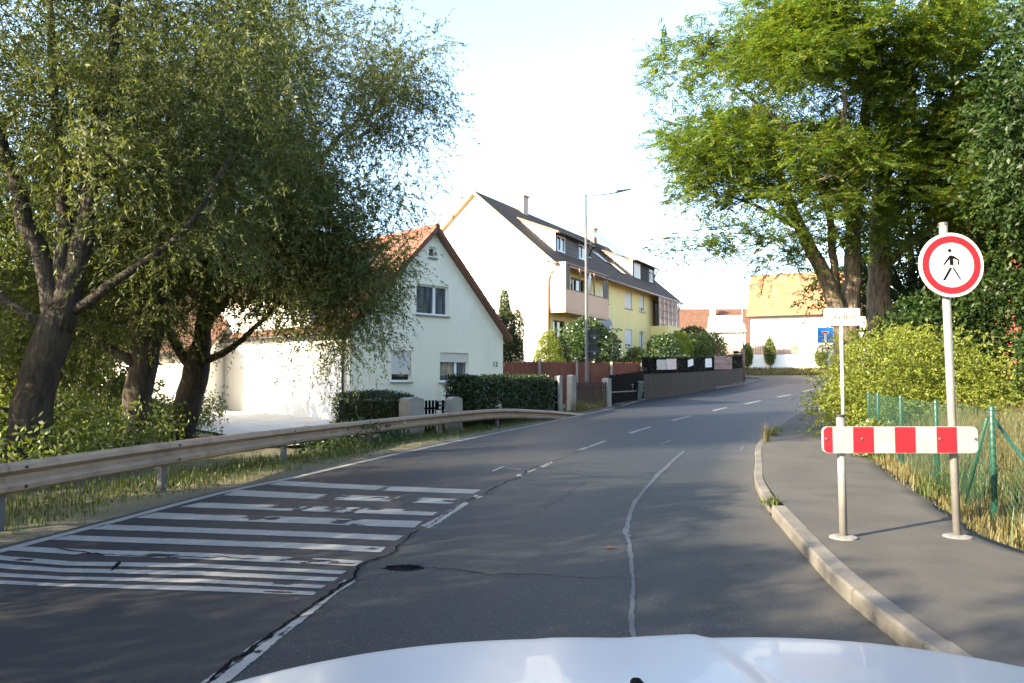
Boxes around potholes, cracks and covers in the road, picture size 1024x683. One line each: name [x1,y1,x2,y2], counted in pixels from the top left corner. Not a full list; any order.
pothole [382,564,425,572]
